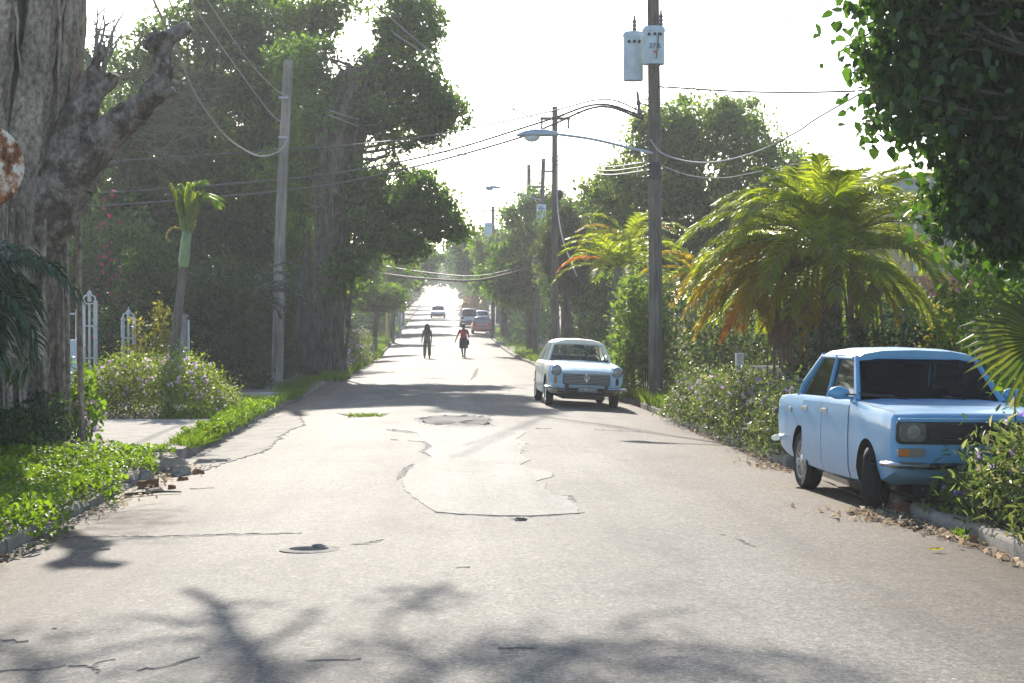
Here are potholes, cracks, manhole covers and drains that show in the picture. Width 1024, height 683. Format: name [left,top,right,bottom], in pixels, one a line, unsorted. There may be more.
crack [137,657,199,671]
pothole [415,415,495,427]
crack [386,429,431,480]
crack [0,659,116,673]
